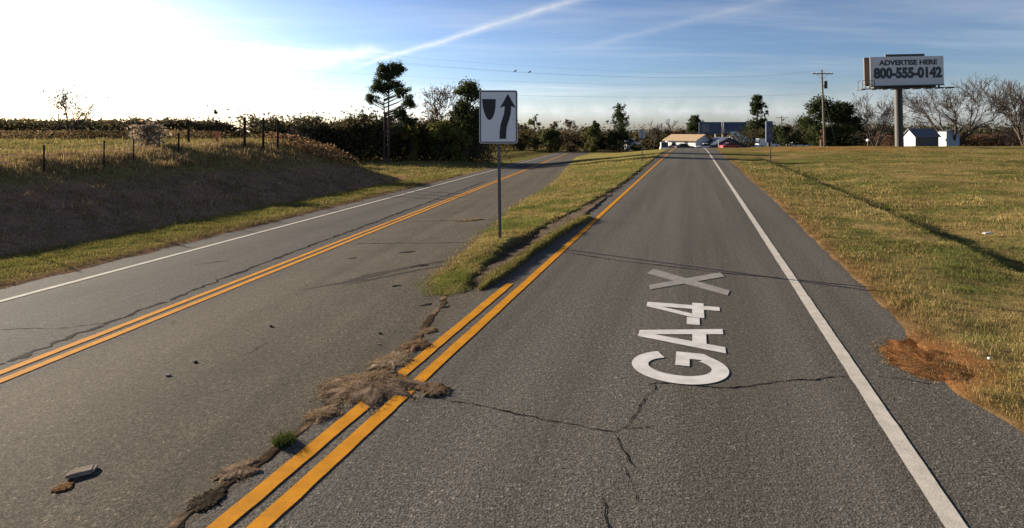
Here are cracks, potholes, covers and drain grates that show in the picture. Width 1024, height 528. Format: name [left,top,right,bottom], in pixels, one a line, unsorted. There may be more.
crack [407,376,848,501]
